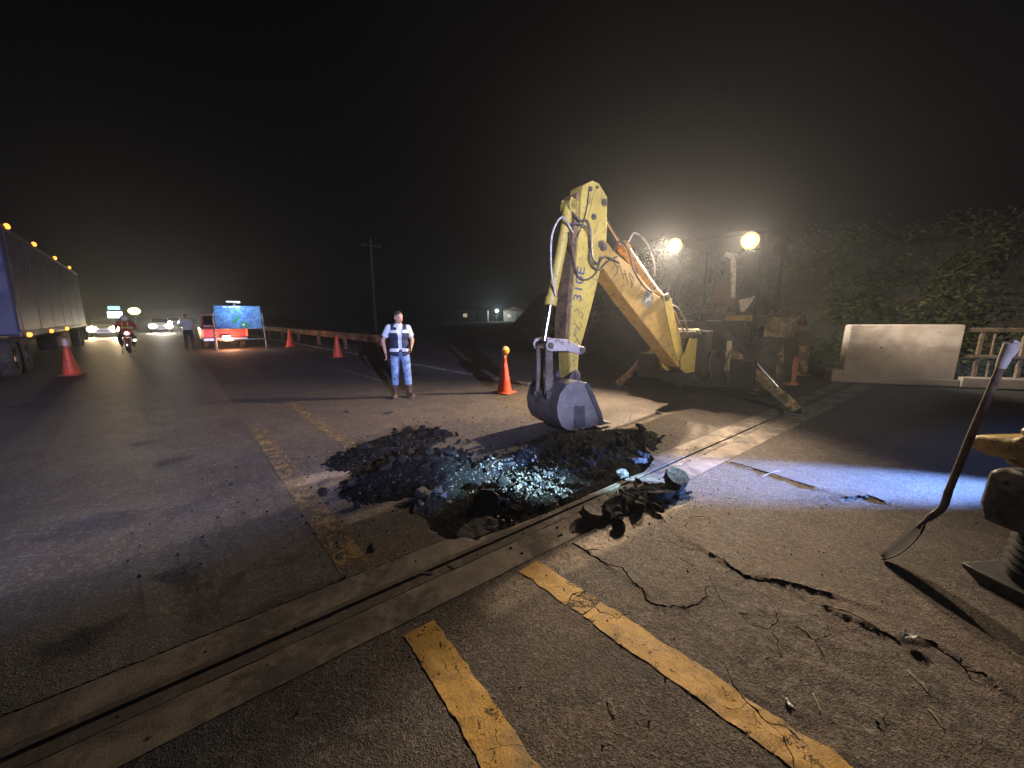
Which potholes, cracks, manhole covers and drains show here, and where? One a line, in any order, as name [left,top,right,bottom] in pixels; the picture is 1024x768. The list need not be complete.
crack [557,543,988,687]
crack [731,462,811,487]
pothole [408,450,654,535]
crack [841,494,884,502]
